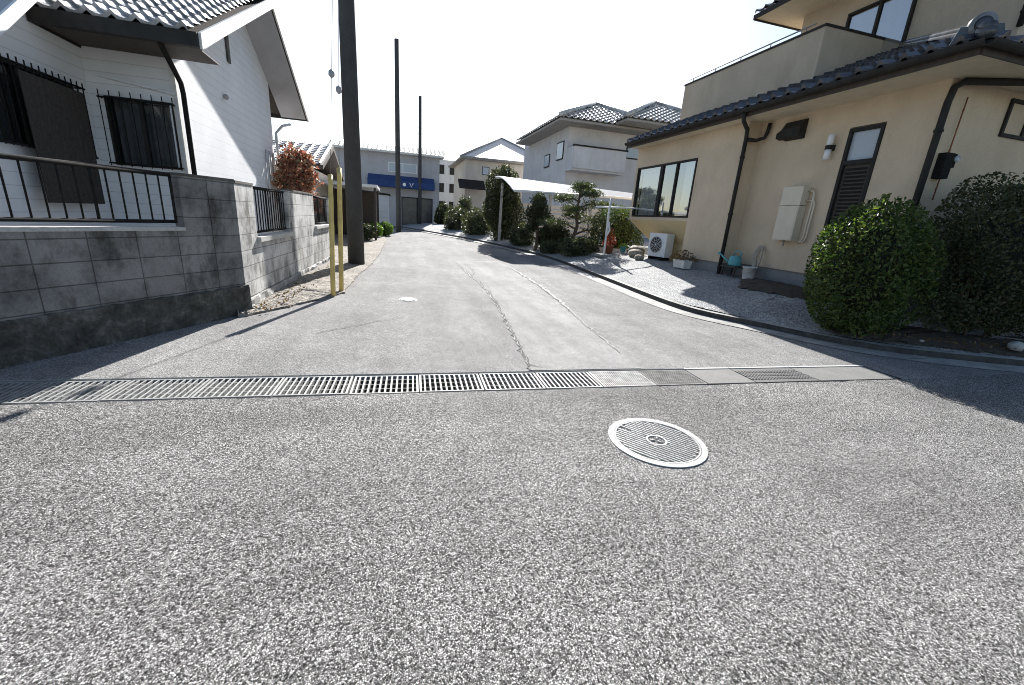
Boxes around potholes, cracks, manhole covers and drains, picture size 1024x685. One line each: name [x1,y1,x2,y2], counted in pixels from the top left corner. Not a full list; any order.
drain grate [100,378,212,402]
drain grate [419,374,484,393]
drain grate [0,382,46,405]
drain grate [349,375,419,395]
drain grate [272,376,354,398]
drain grate [190,377,285,400]
manhole cover [608,418,708,468]
drain grate [588,371,657,388]
drain grate [638,370,707,386]
crack [460,267,619,370]
drain grate [535,372,603,390]
drain grate [479,373,546,391]
